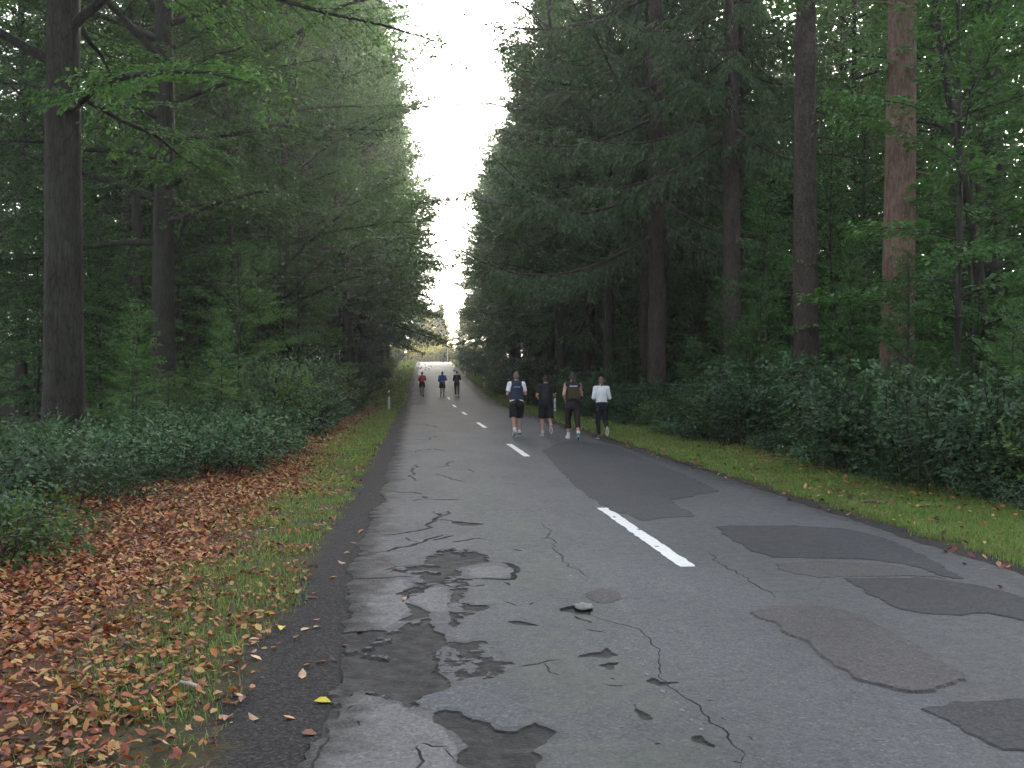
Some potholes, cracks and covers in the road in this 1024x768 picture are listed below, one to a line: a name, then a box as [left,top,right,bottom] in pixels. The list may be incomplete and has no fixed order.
pothole [432,709,557,768]
pothole [310,618,451,742]
crack [355,412,482,602]
pothole [433,640,516,681]
pothole [578,647,618,658]
pothole [399,603,430,621]
pothole [447,584,493,627]
crack [711,554,775,597]
pothole [391,548,493,596]
pothole [634,704,653,720]
pothole [691,735,715,748]
